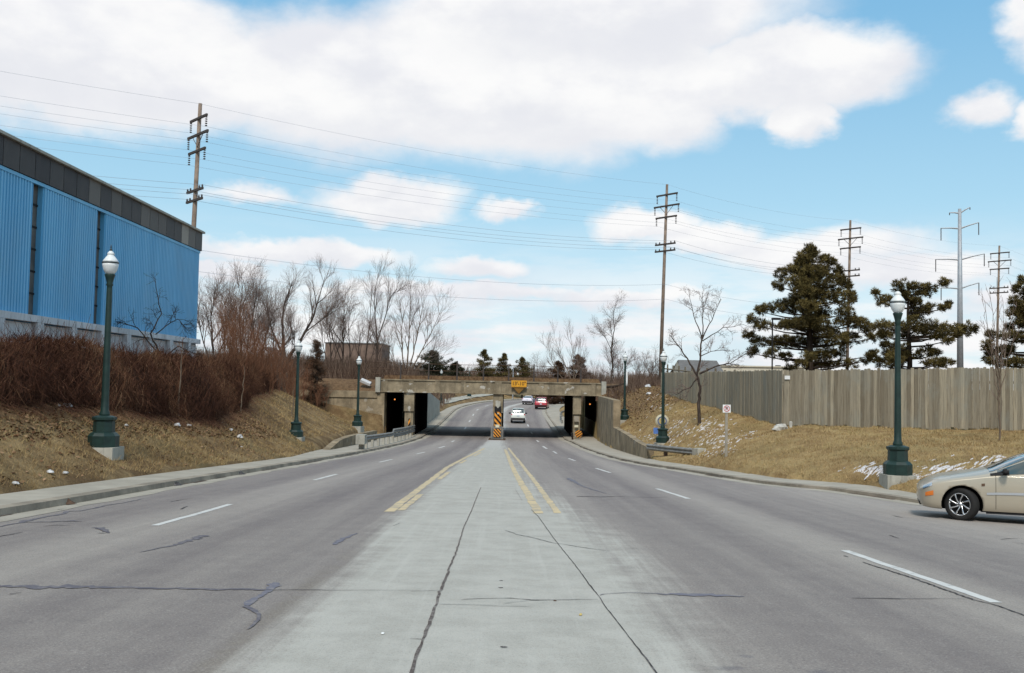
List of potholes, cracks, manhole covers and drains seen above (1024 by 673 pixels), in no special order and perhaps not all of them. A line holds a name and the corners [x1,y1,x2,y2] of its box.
crack [0,498,143,536]
